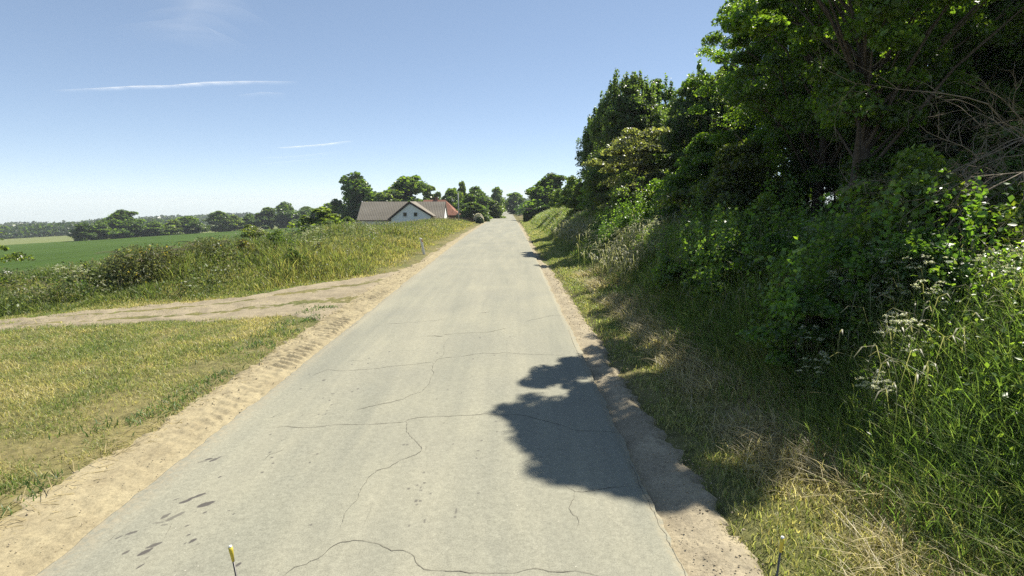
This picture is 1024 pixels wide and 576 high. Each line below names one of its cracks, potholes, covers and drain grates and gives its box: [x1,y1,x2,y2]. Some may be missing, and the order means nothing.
crack [265,413,619,527]
crack [324,319,542,409]
crack [289,540,599,576]
